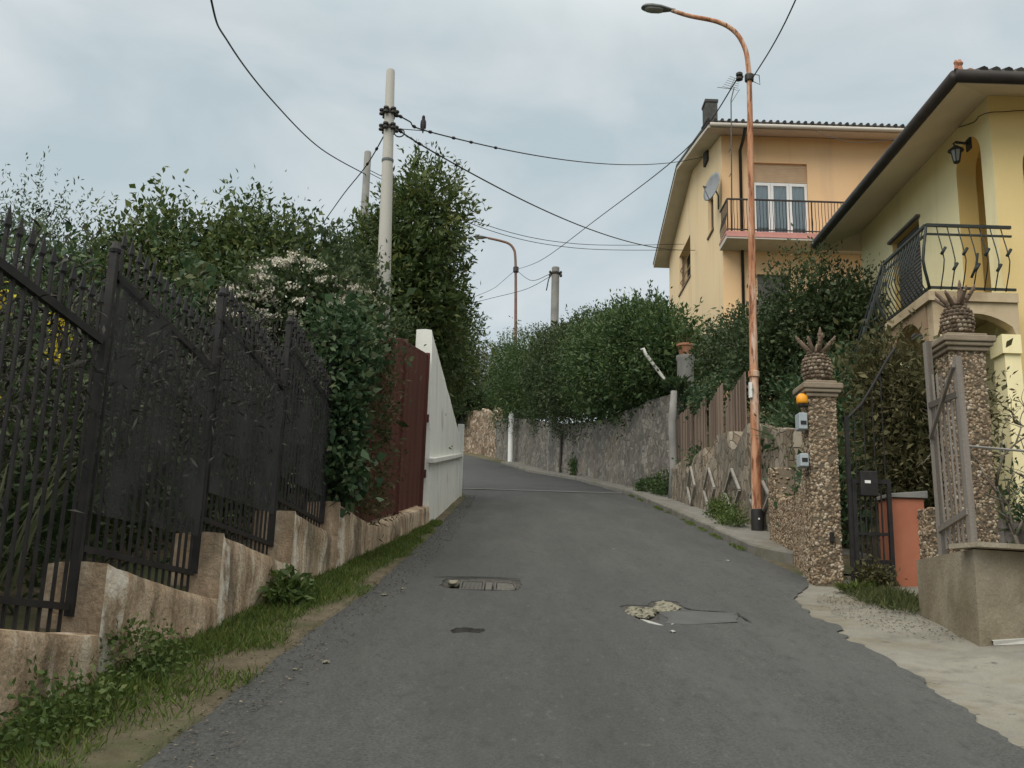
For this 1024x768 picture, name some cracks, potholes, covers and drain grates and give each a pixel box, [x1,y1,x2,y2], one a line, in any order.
manhole cover [494,582,516,591]
pothole [621,601,683,623]
